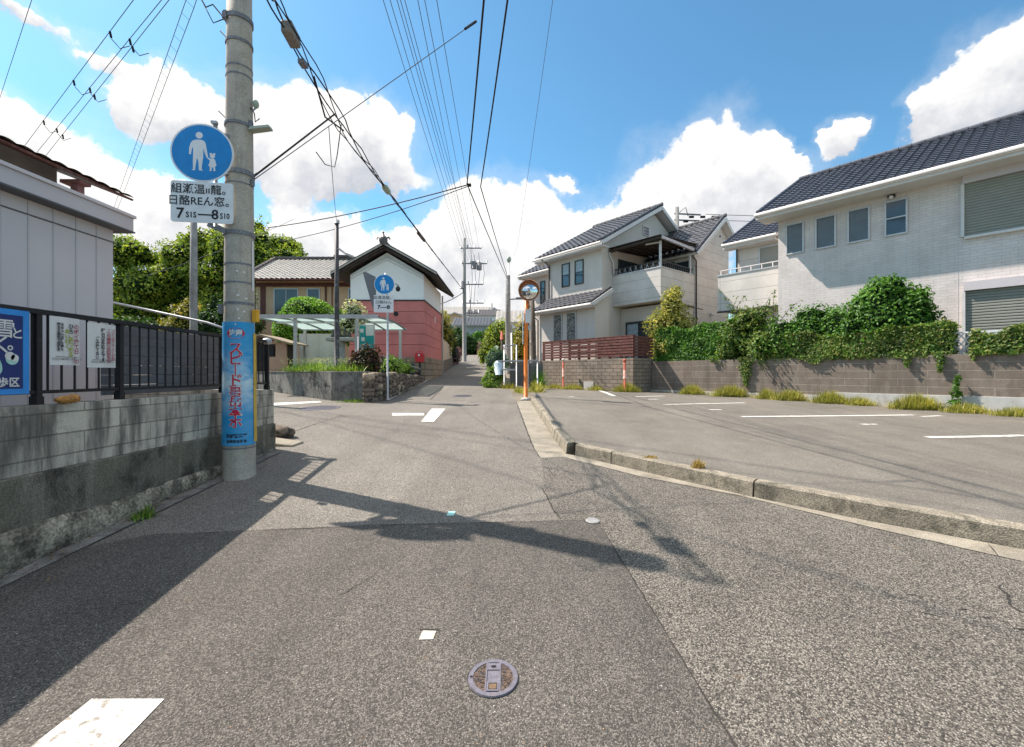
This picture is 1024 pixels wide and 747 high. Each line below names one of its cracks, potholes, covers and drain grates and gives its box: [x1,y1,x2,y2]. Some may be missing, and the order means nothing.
manhole cover [467,659,519,699]
crack [963,585,1024,630]
